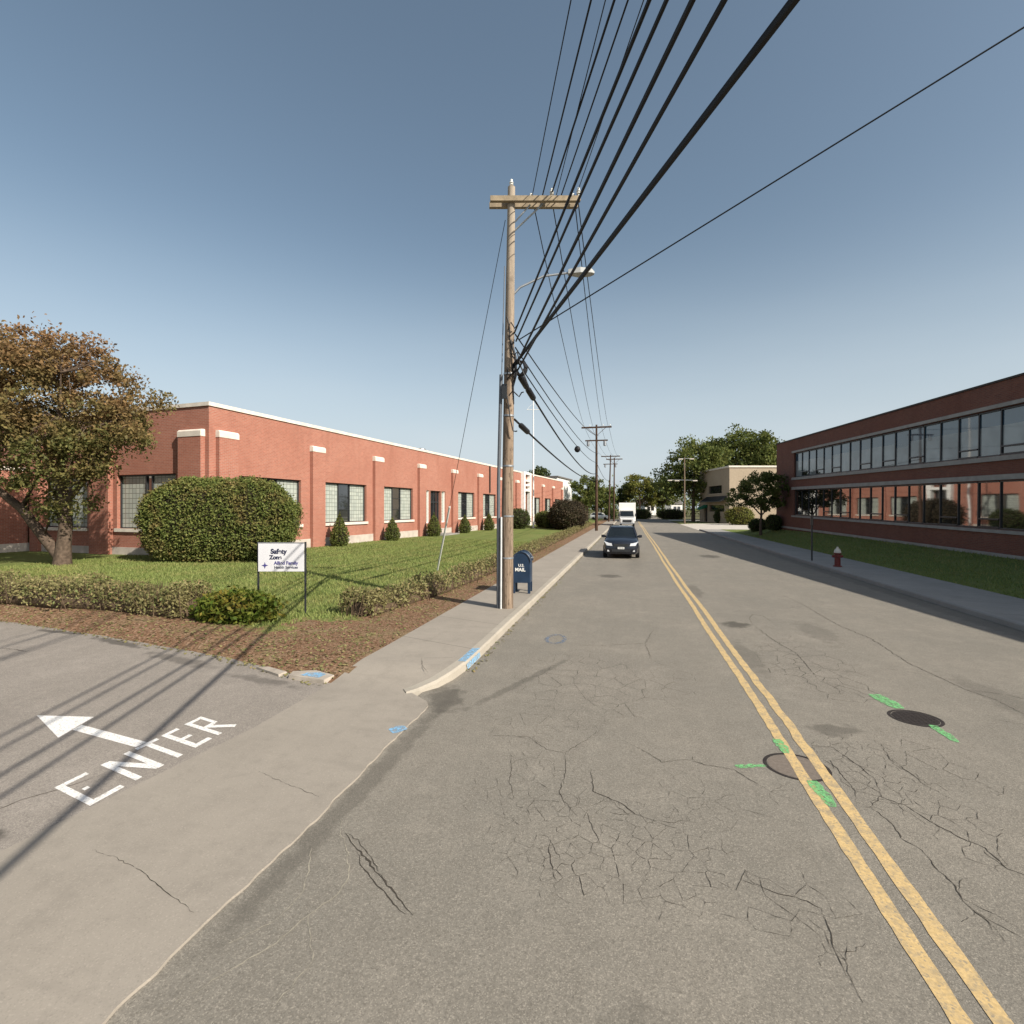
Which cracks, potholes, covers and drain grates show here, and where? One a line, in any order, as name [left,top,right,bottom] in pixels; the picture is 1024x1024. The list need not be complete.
crack [95,849,192,912]
crack [462,654,791,919]
manhole cover [763,753,832,782]
crack [715,870,865,1002]
crack [812,728,1024,947]
crack [164,819,413,1009]
crack [750,599,1023,724]
manhole cover [887,709,945,727]
